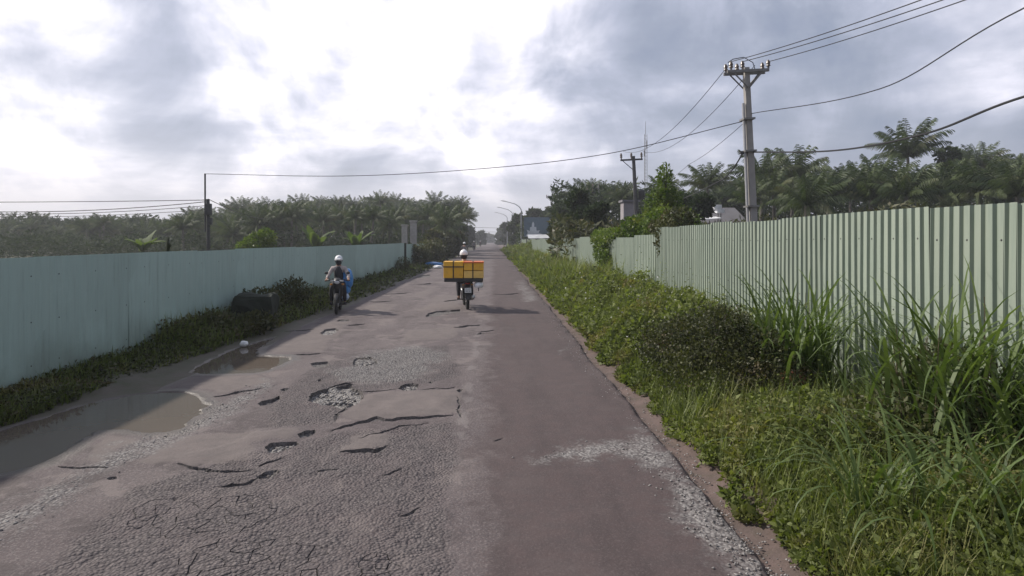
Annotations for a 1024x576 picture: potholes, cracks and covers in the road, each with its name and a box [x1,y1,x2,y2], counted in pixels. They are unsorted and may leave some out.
pothole [426,309,461,317]
pothole [353,357,378,367]
crack [126,458,329,576]
pothole [188,336,292,374]
crack [358,552,402,576]
crack [318,387,462,476]
pothole [308,384,364,410]
pothole [265,442,300,453]
